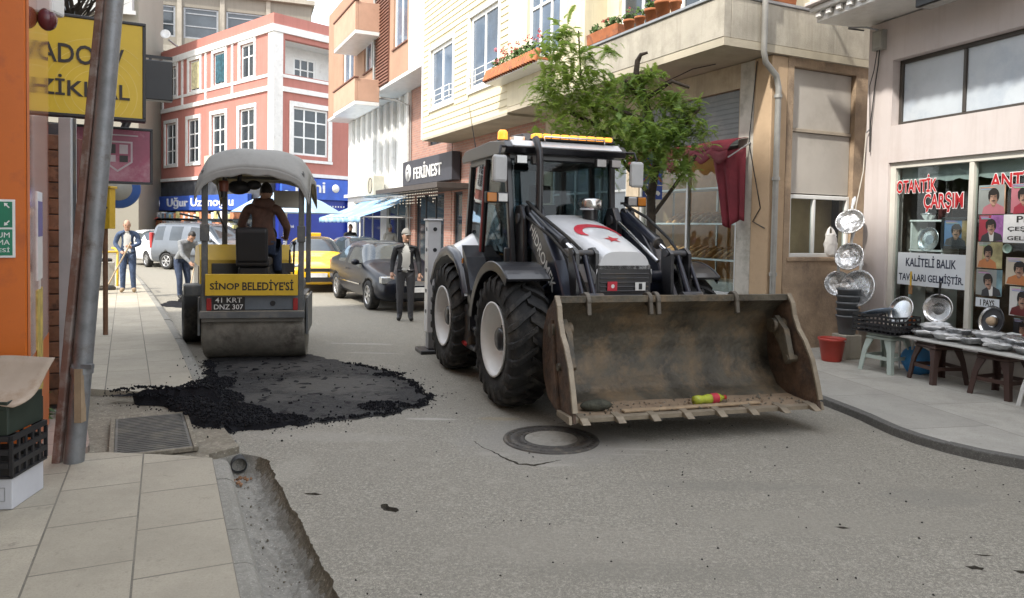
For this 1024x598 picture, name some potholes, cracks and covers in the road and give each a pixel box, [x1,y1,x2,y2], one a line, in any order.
crack [474,441,559,466]
manhole cover [503,425,599,454]
